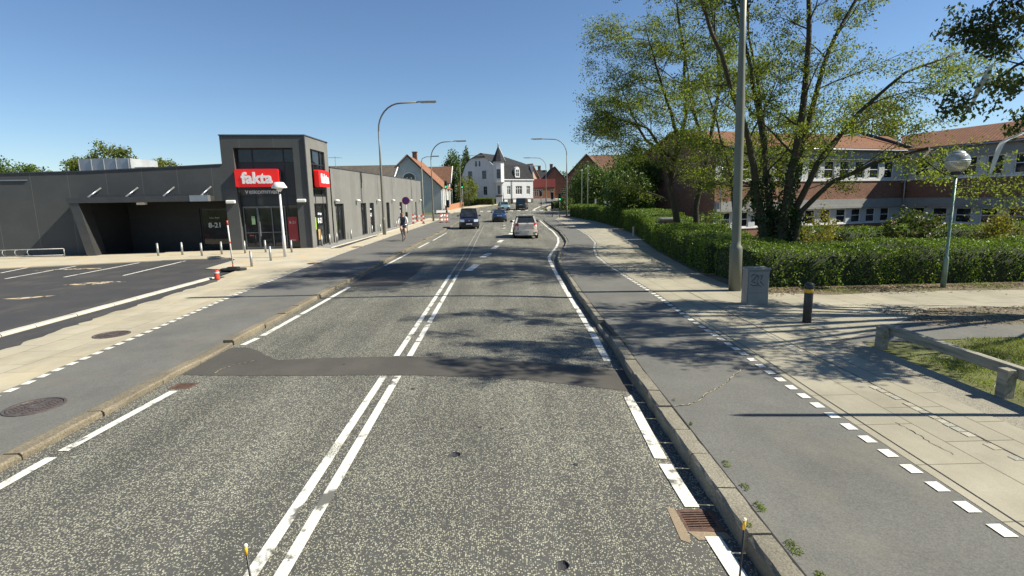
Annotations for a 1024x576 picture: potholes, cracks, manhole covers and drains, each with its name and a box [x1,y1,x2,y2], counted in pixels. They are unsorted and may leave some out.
crack [675,368,743,406]
drain grate [676,509,726,532]
manhole cover [0,397,67,417]
pothole [556,558,570,572]
manhole cover [92,330,131,339]
